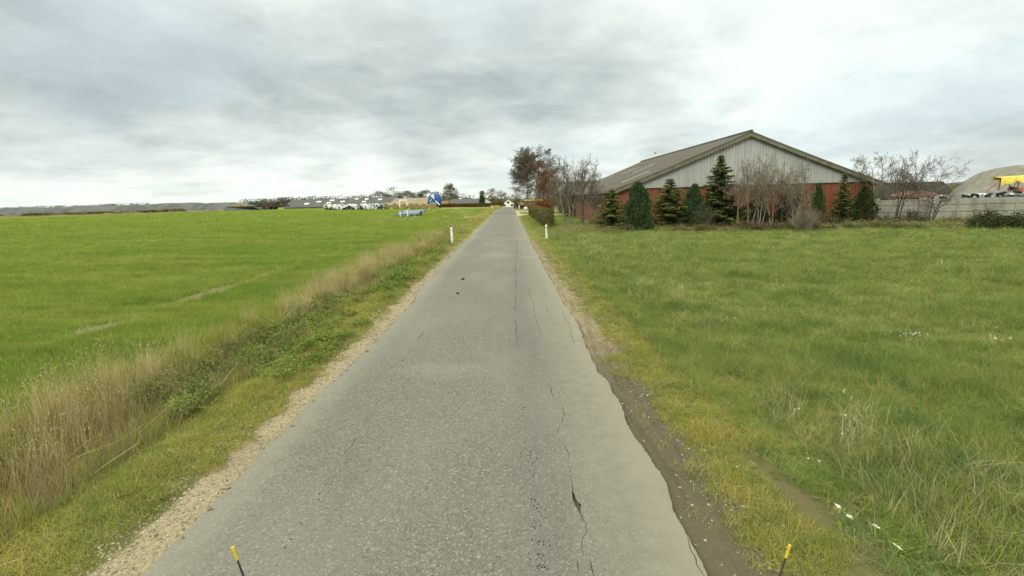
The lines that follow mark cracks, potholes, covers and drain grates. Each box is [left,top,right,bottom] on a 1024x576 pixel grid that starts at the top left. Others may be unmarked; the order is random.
crack [529,293,594,576]
